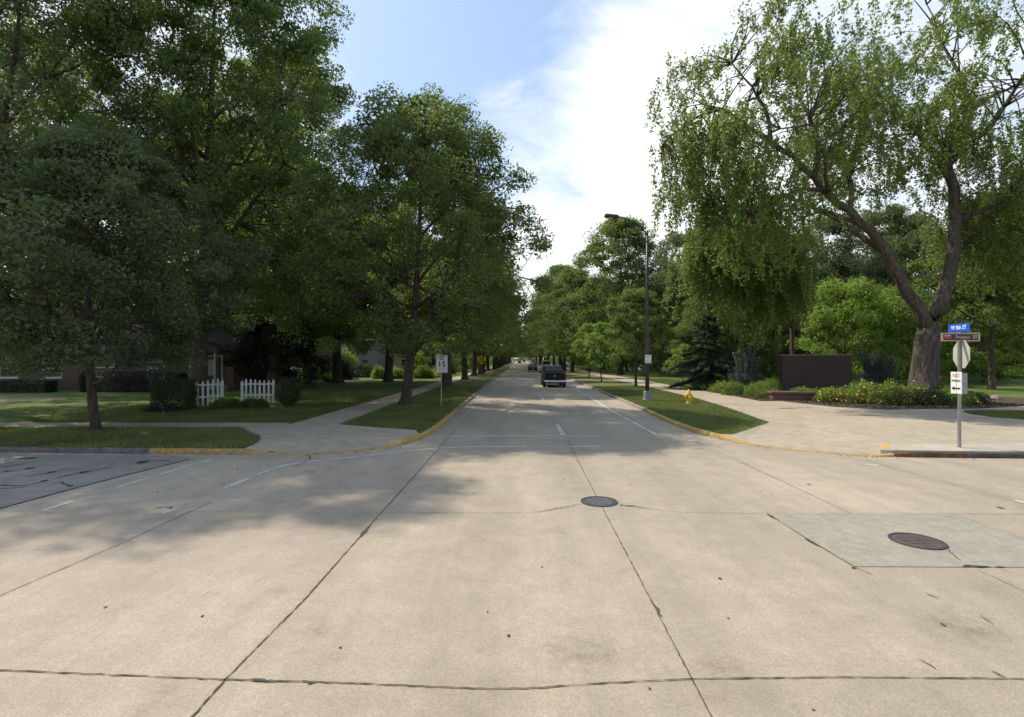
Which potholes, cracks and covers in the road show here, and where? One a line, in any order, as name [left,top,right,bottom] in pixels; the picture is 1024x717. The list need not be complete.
manhole cover [888,532,948,550]
crack [0,467,109,488]
manhole cover [581,496,618,507]
